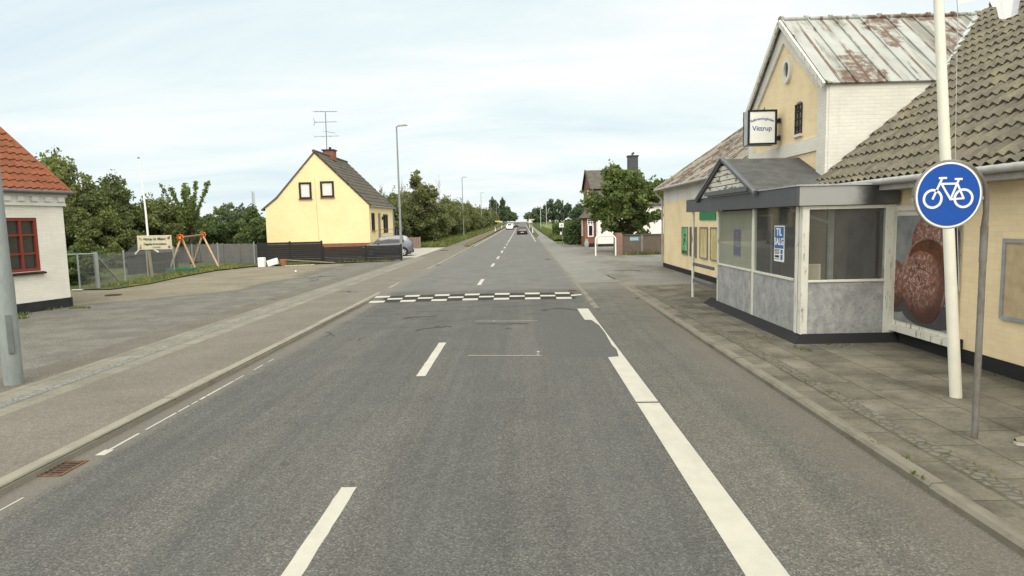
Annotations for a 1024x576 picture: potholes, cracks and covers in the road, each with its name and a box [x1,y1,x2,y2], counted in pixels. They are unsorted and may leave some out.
drain grate [37,460,89,477]
